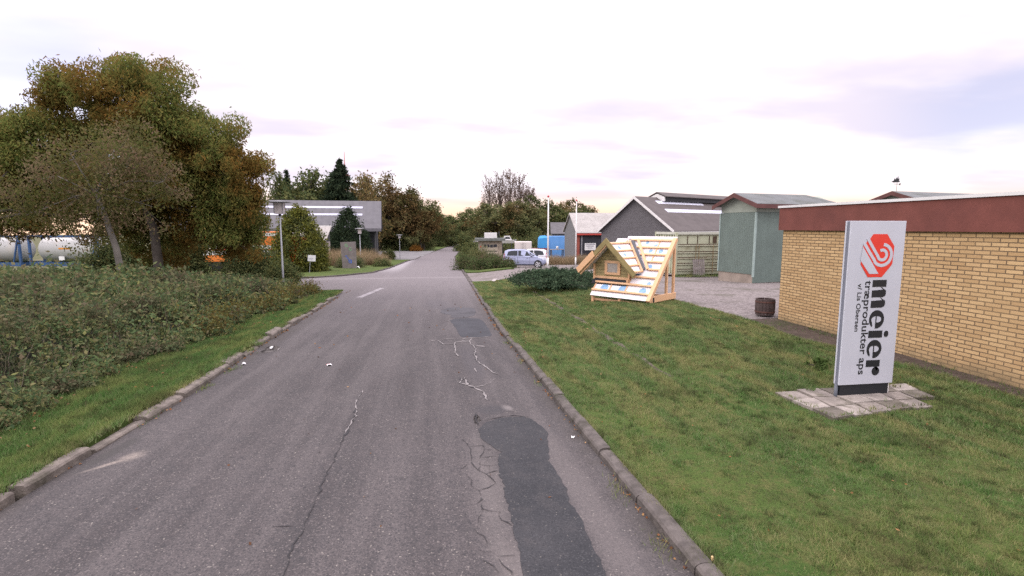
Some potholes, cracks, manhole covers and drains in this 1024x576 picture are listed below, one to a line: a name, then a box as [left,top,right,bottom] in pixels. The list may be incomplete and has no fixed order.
crack [430,336,526,573]
crack [283,390,363,576]
